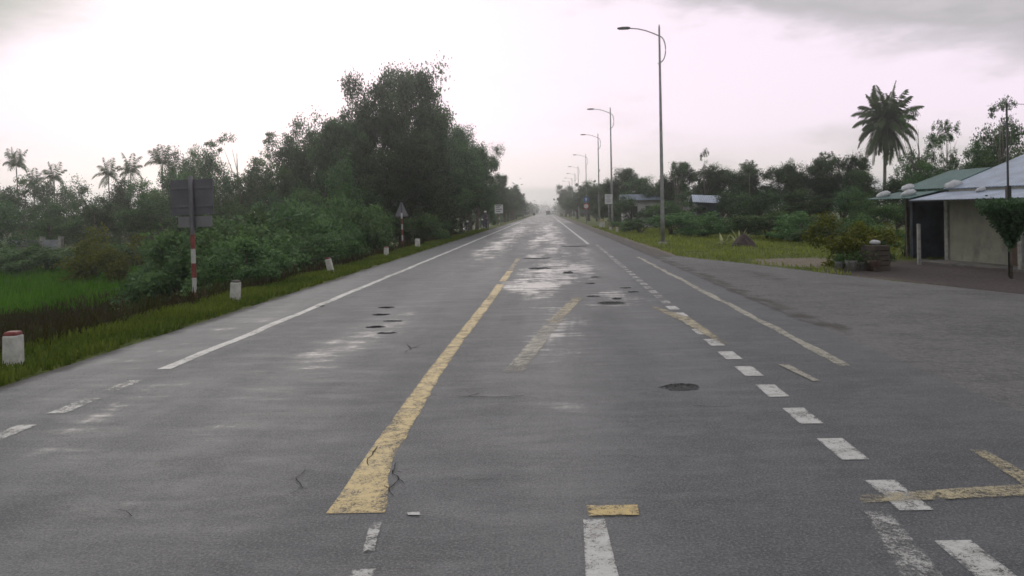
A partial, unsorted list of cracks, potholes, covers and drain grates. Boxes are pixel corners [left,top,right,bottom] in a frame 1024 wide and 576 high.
crack [367,446,404,495]
pothole [658,383,699,391]
